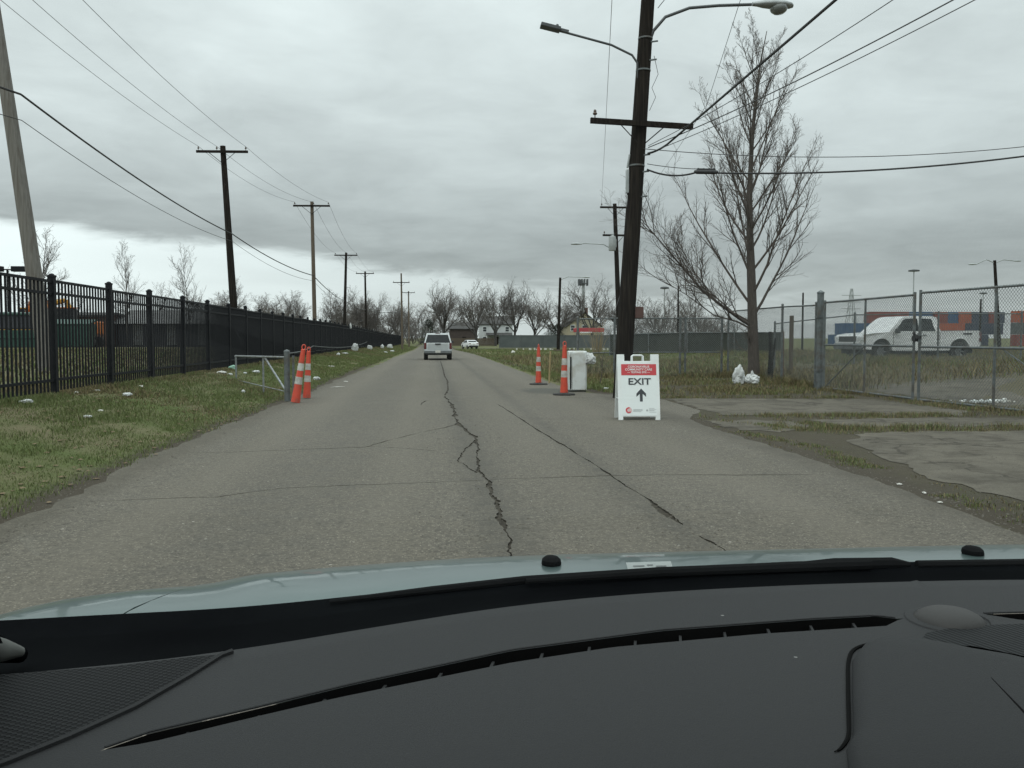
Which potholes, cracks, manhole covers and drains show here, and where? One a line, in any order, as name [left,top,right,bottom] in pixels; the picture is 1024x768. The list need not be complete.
crack [93,361,726,556]
